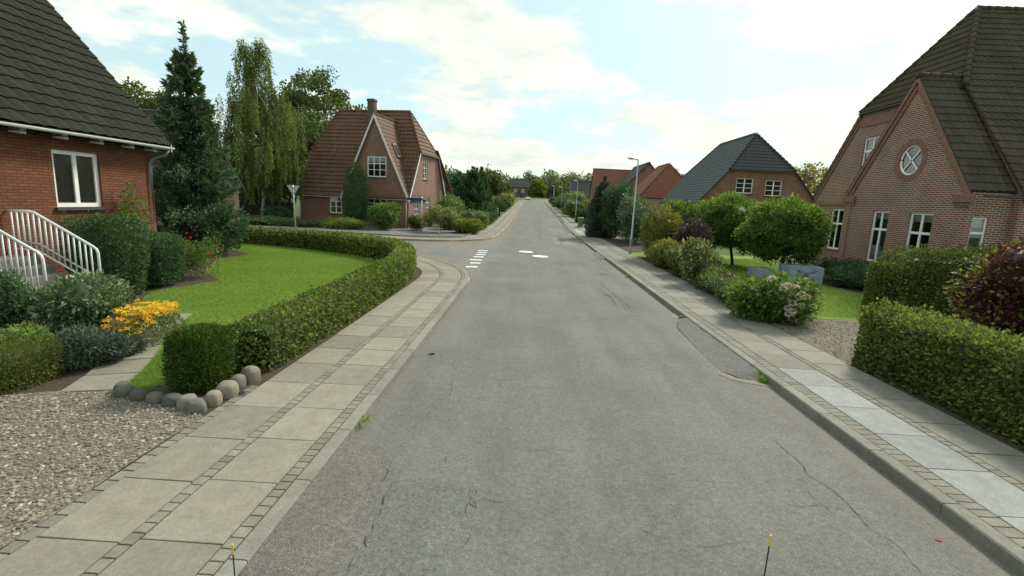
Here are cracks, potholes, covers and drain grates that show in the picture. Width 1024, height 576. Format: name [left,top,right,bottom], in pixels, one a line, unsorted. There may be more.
crack [776,441,919,569]
crack [349,461,393,567]
